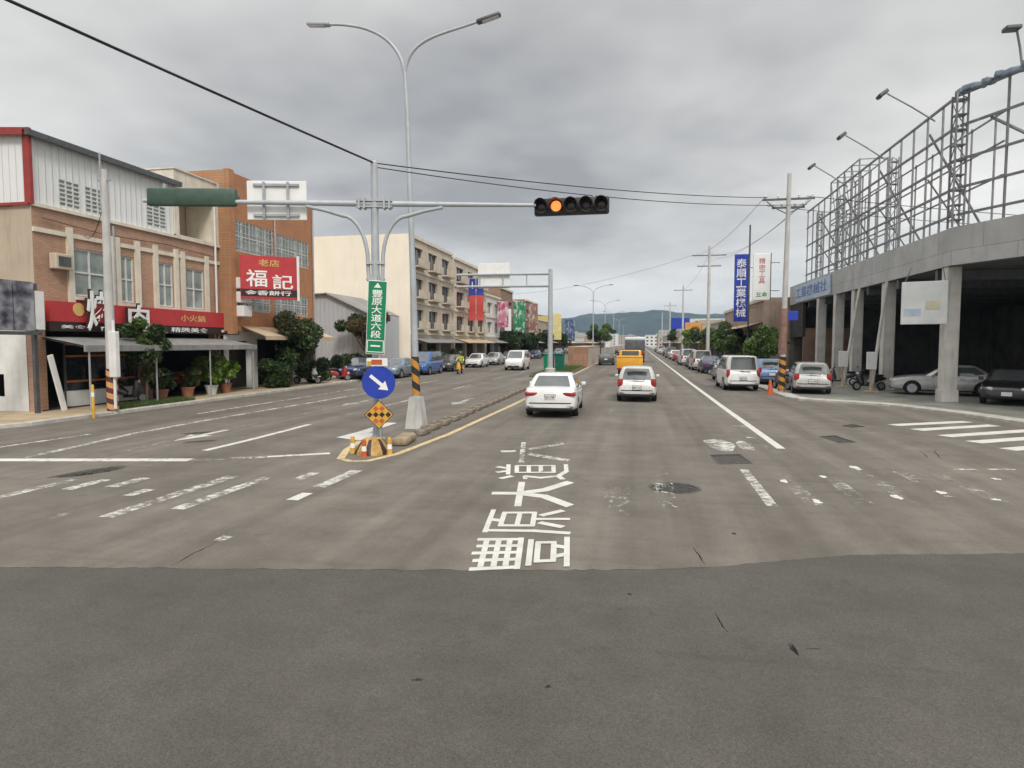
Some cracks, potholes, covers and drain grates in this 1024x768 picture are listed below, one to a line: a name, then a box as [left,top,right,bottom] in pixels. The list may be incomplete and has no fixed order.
manhole cover [648,482,701,494]
manhole cover [820,435,856,443]
manhole cover [710,454,752,465]
